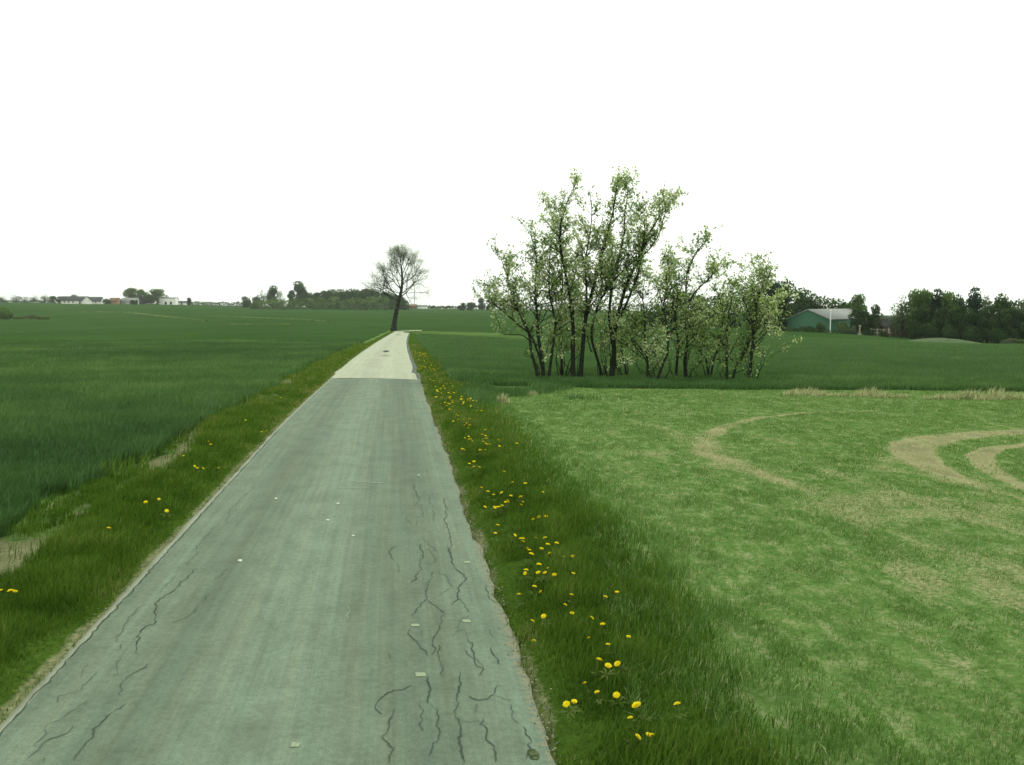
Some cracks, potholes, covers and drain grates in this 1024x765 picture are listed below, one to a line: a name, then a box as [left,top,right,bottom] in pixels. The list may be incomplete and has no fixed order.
crack [29,485,256,760]
crack [375,486,532,764]
